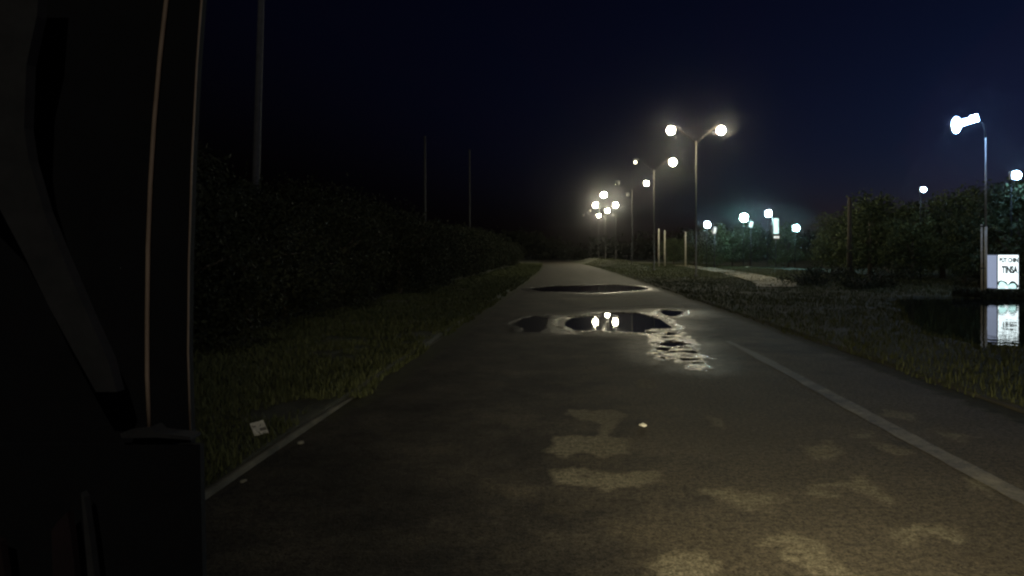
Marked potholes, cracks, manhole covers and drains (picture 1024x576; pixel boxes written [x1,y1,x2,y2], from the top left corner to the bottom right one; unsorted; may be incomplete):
pothole [503,315,556,334]
pothole [651,309,690,317]
pothole [521,284,652,294]
pothole [549,312,685,335]
pothole [644,330,714,372]
